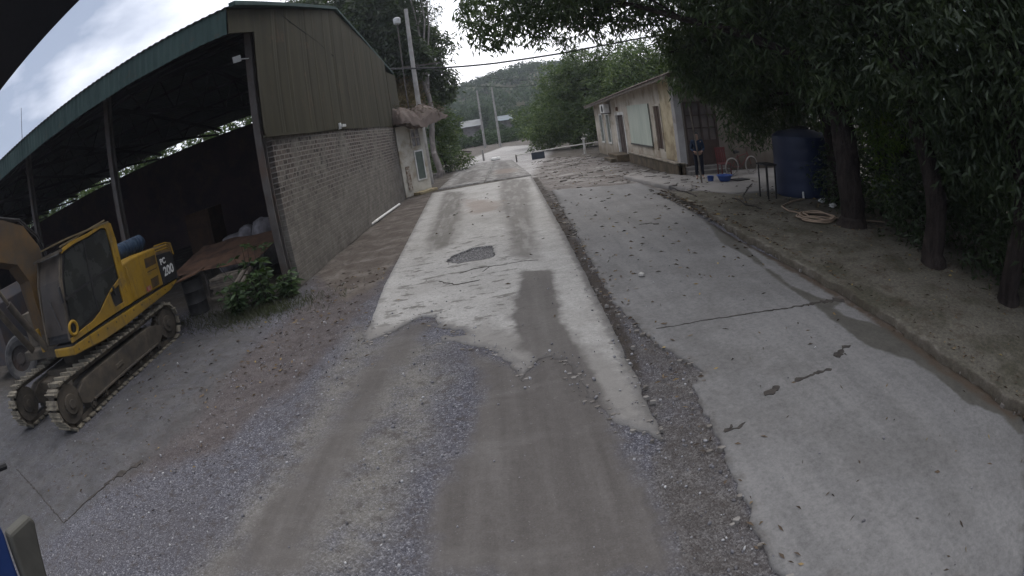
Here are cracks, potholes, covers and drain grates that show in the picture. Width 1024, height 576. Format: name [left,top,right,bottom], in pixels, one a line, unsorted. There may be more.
crack [439,260,533,285]
pothole [446,246,495,264]
crack [16,459,143,523]
